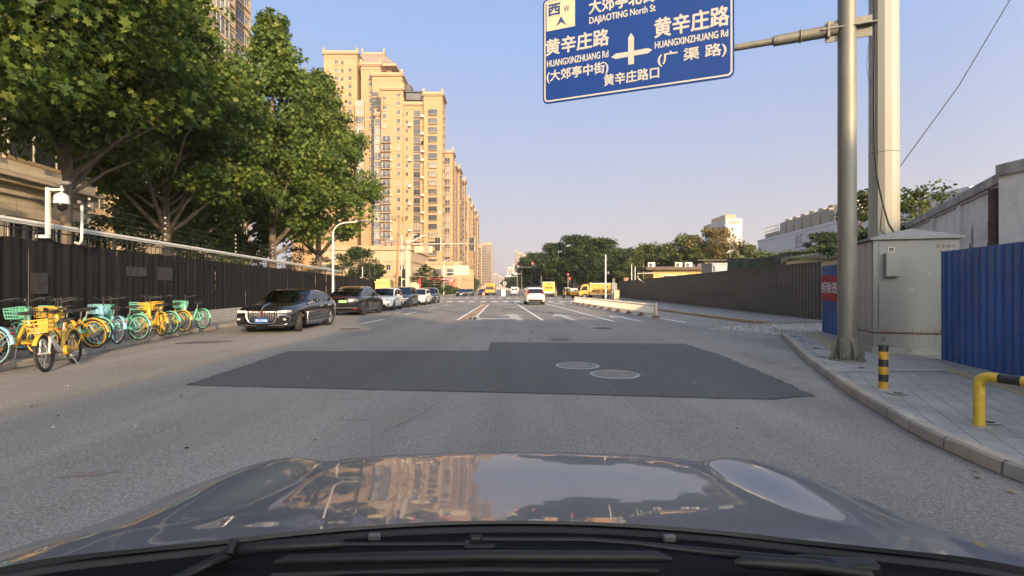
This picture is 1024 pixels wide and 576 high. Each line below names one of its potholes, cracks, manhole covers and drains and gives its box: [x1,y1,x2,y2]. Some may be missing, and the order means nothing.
manhole cover [590,370,641,379]
